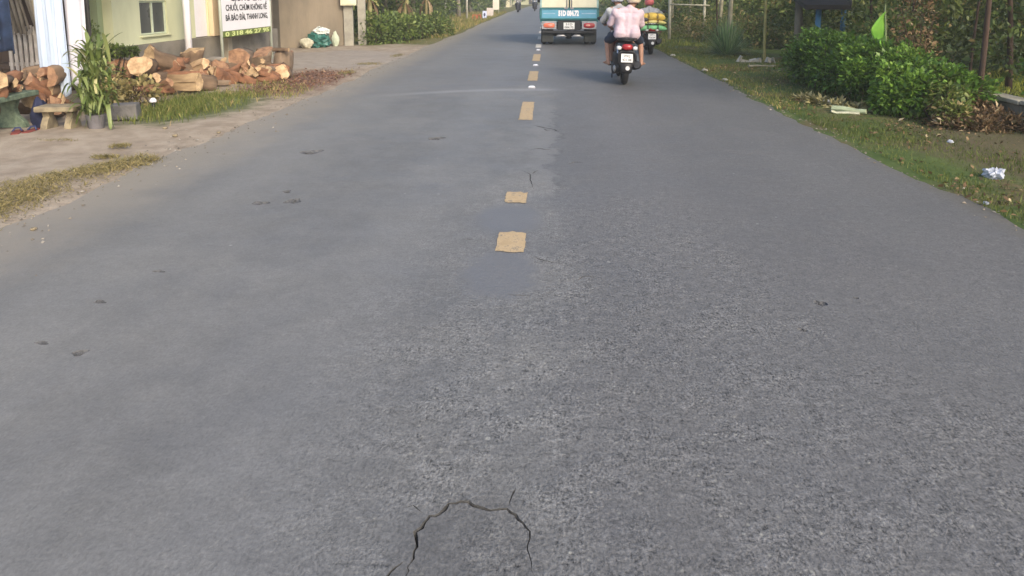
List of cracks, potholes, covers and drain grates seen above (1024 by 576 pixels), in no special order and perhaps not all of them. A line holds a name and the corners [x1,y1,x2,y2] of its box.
crack [387,488,534,576]
